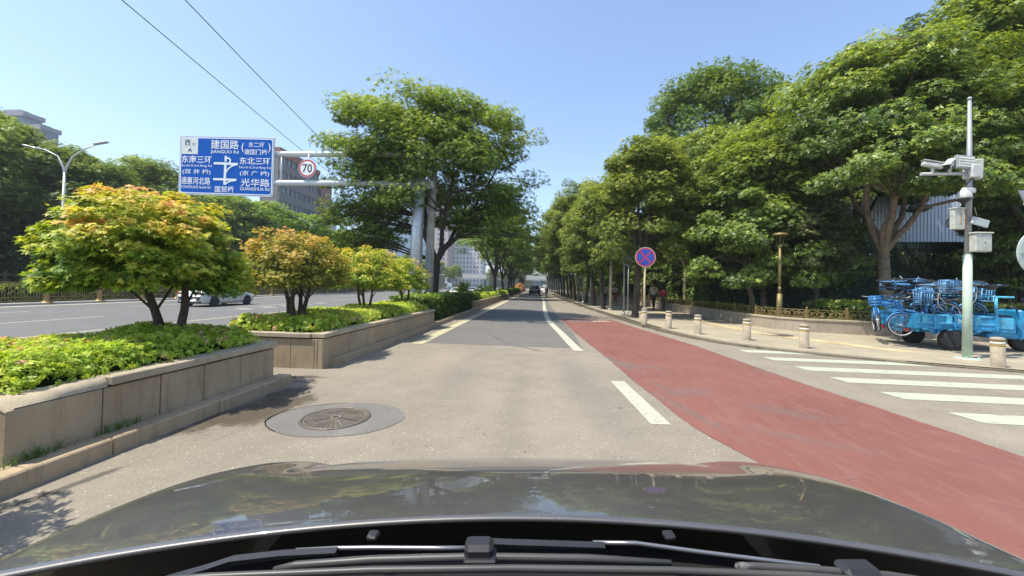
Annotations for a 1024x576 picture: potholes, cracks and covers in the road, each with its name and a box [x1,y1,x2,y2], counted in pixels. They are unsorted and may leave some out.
manhole cover [298,407,371,430]
